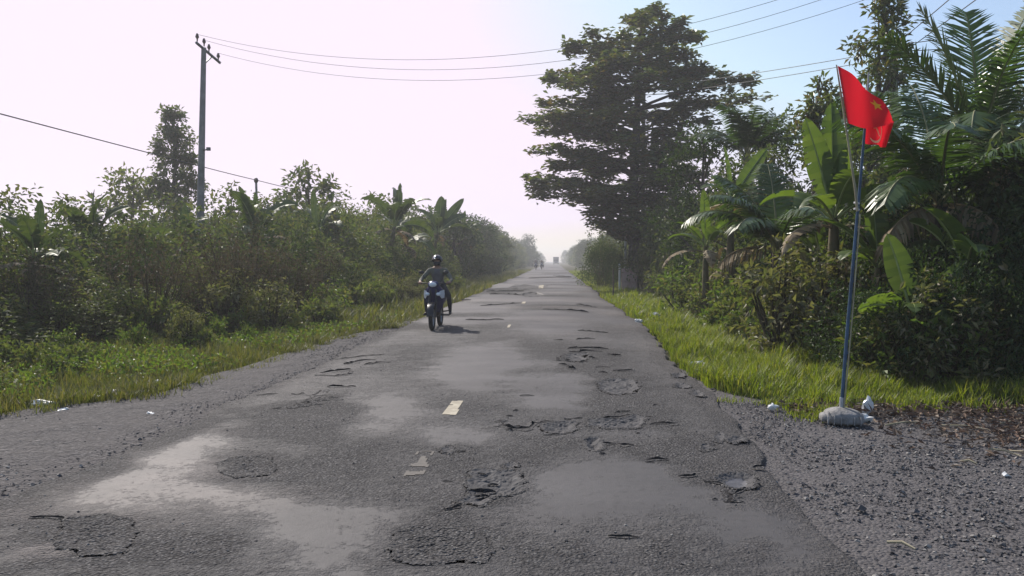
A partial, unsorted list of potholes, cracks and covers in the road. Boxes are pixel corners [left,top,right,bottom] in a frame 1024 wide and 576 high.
pothole [579,436,607,452]
pothole [584,414,650,430]
pothole [561,353,588,362]
pothole [595,377,642,395]
pothole [537,420,581,435]
pothole [499,461,521,469]
pothole [453,467,529,508]
pothole [711,472,761,491]
